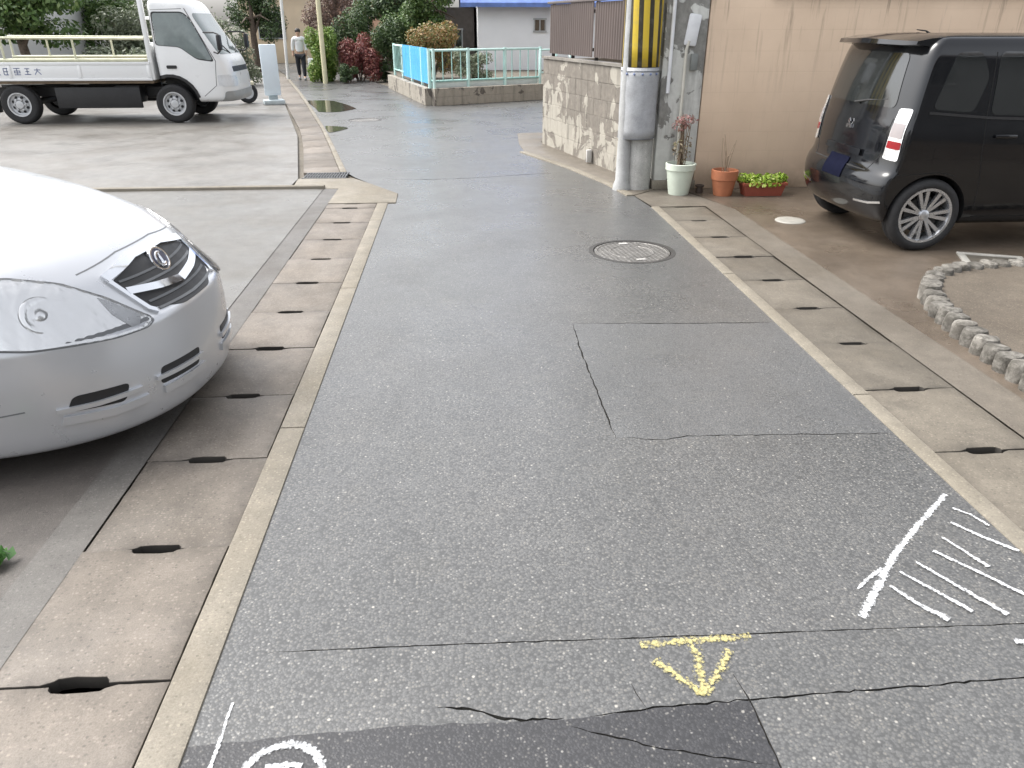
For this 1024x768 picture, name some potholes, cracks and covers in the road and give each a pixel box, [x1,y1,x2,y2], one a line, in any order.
manhole cover [589,240,676,264]
crack [437,707,770,765]
